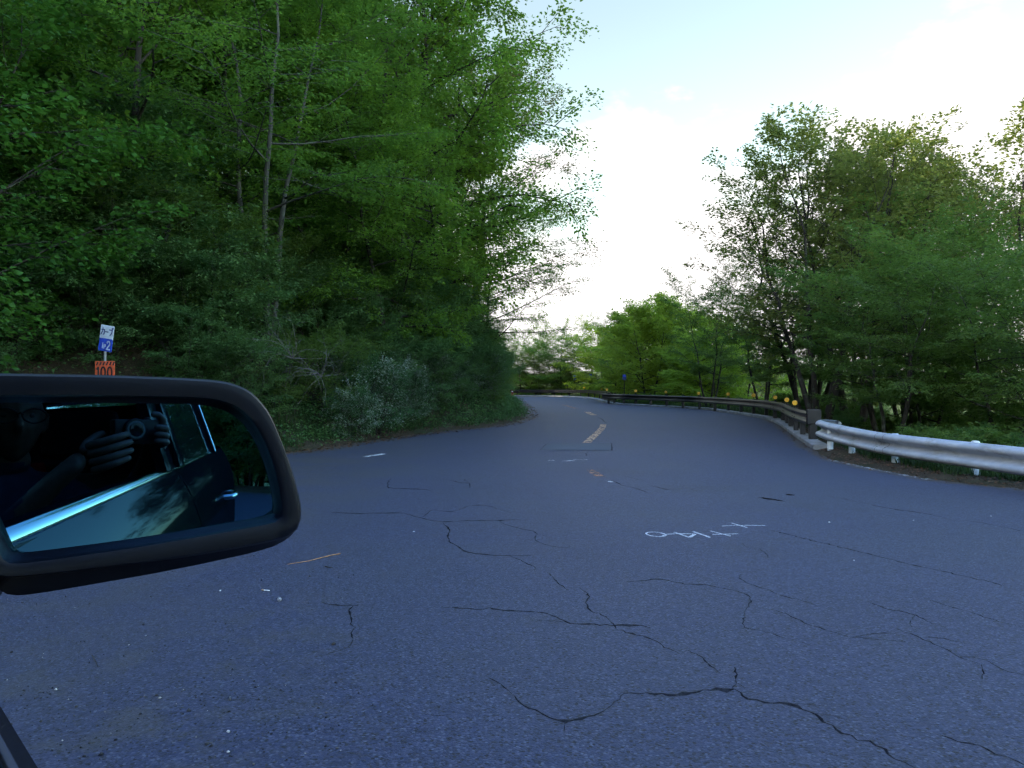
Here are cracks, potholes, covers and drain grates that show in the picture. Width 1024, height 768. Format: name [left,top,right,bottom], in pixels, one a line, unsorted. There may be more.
crack [942,735,1024,765]
crack [629,578,1023,679]
crack [352,505,563,569]
crack [490,668,915,768]
crack [324,603,359,655]
crack [772,530,1000,585]
crack [447,588,678,653]
